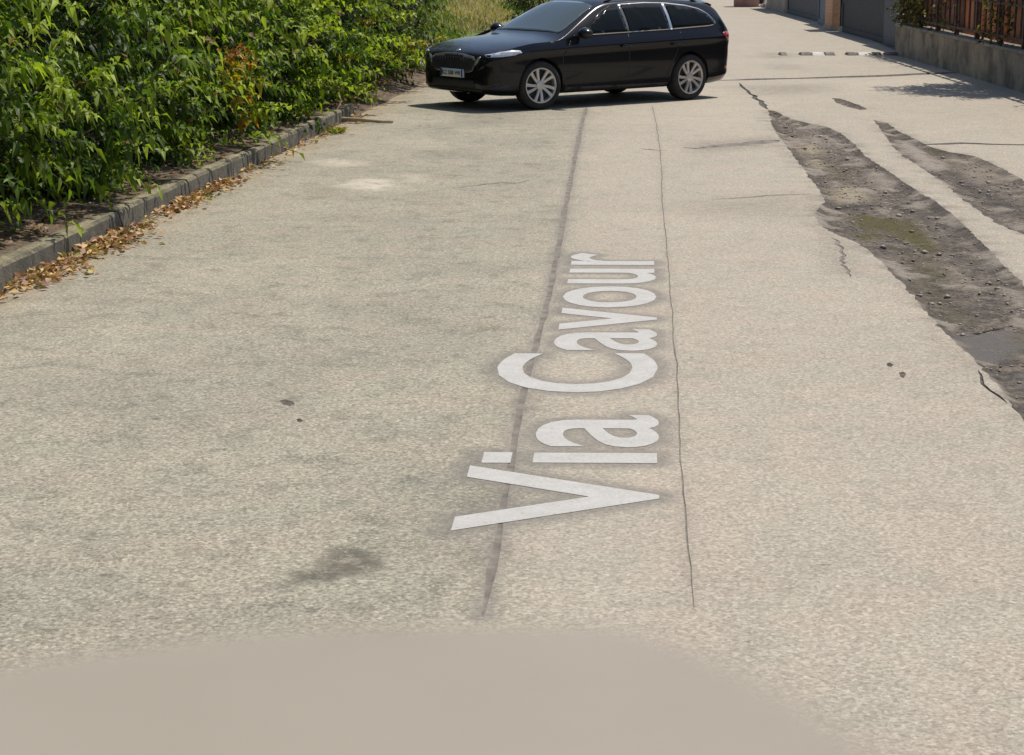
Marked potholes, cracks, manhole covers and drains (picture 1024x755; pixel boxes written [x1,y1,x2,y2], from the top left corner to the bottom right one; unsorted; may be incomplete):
pothole [832,98,866,110]
crack [645,106,694,608]
crack [832,238,852,278]
crack [739,83,768,109]
crack [978,370,1007,403]
pothole [768,110,1024,420]
crack [452,180,529,189]
